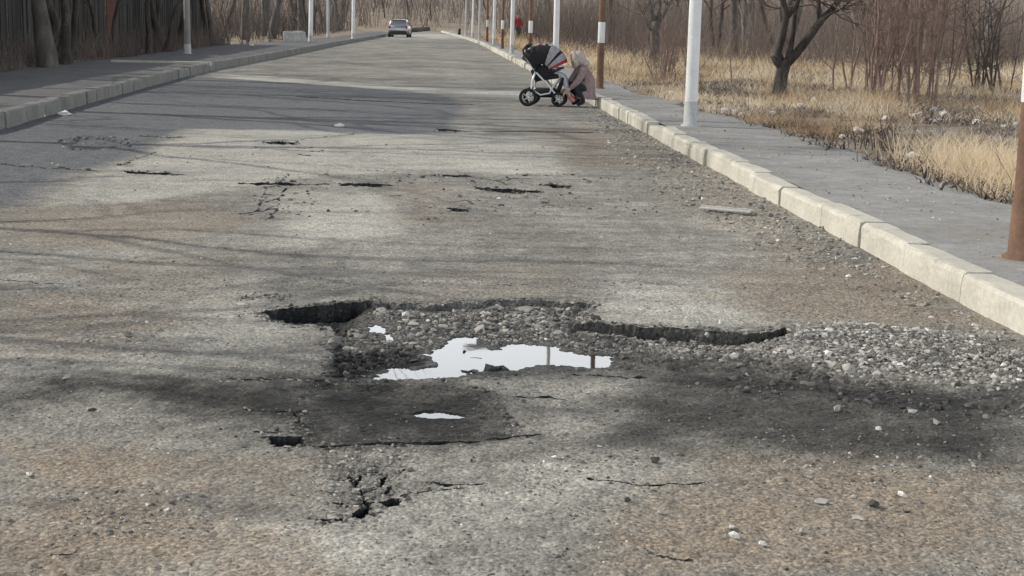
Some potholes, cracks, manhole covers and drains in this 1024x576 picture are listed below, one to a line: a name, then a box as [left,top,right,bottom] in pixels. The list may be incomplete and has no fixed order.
pothole [570,322,795,350]
pothole [258,299,654,381]
crack [586,477,709,487]
pothole [268,436,304,447]
crack [320,469,485,522]
crack [239,184,329,220]
